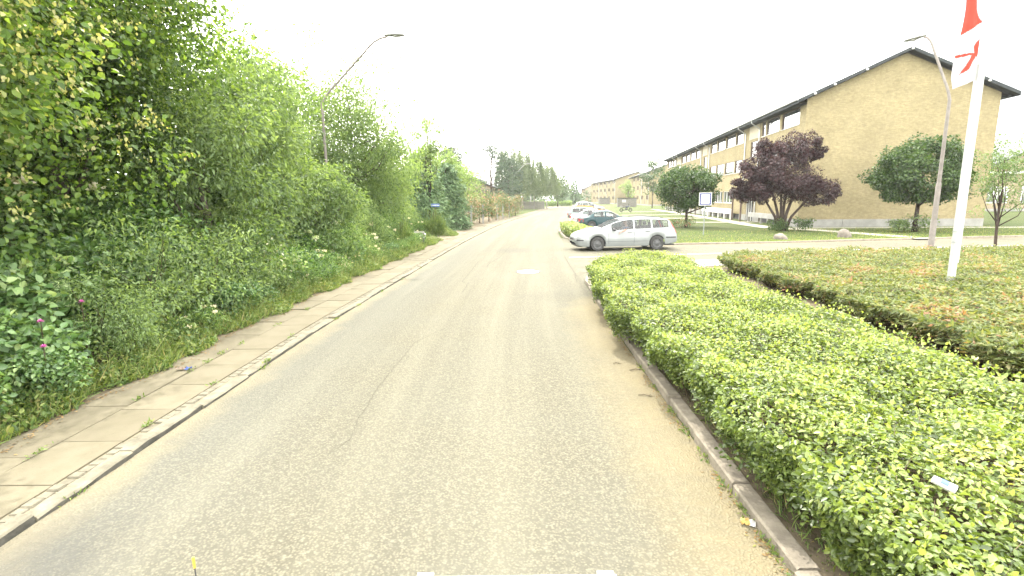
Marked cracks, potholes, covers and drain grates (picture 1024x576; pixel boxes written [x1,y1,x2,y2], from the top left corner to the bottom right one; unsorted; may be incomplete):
crack [326,323,457,455]
